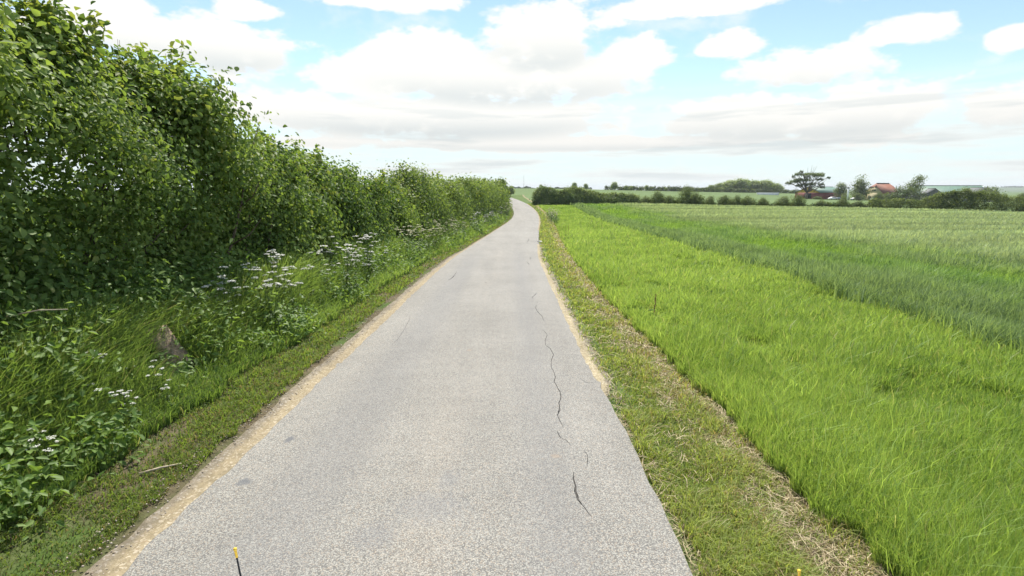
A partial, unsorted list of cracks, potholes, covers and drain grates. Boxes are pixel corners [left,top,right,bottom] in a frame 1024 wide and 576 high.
crack [532,294,590,515]
